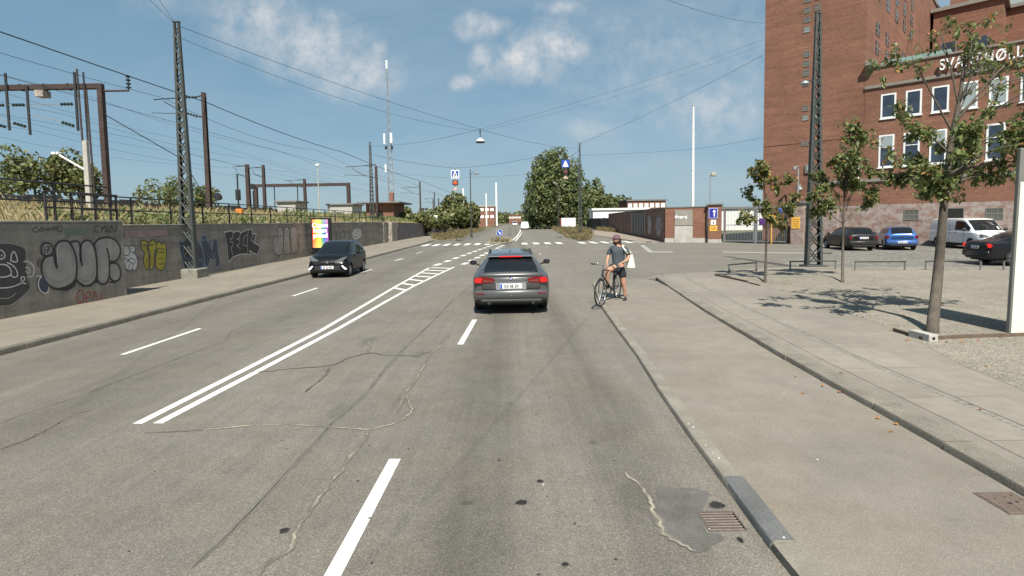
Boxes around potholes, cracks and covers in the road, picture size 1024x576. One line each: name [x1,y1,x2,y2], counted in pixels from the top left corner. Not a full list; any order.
utility cover [973,492,1024,515]
crack [625,472,696,551]
drain grate [696,511,748,532]
